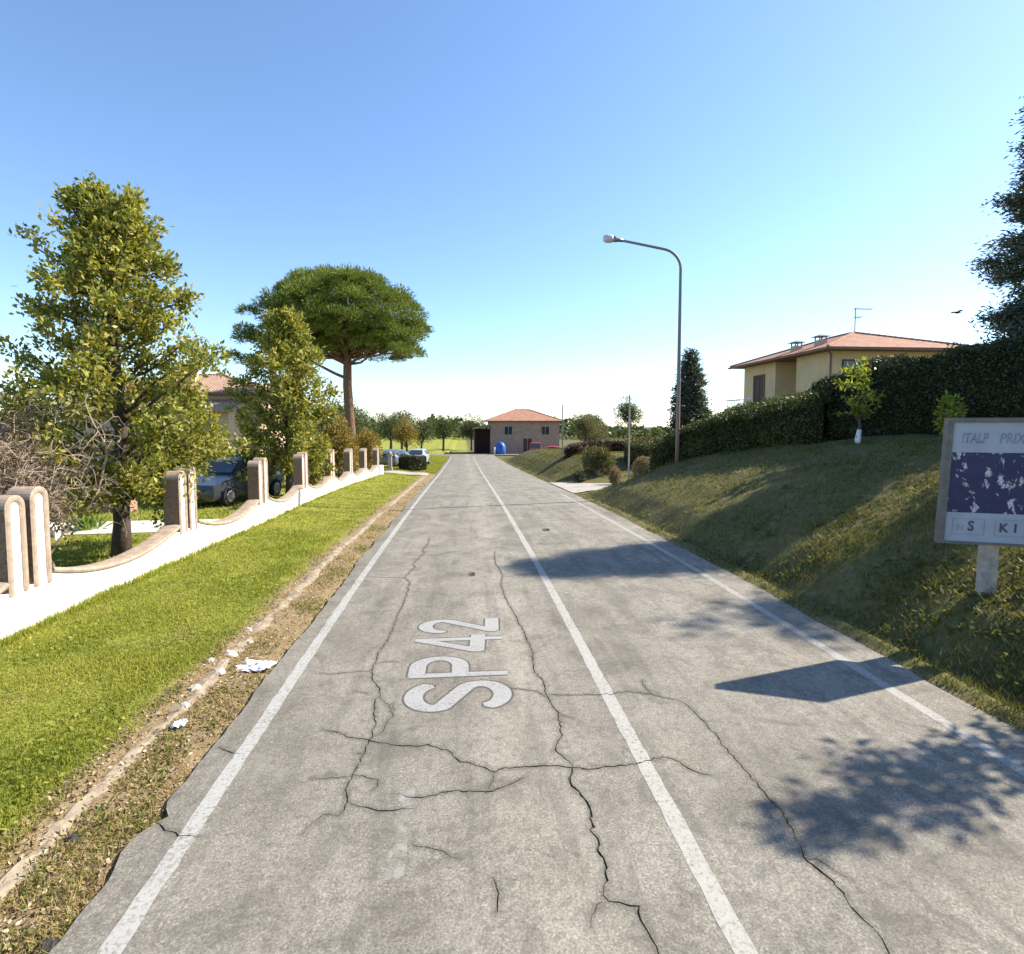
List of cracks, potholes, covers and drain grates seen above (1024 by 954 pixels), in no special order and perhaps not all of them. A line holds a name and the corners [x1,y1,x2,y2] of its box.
crack [552,680,890,954]
crack [303,538,711,954]
